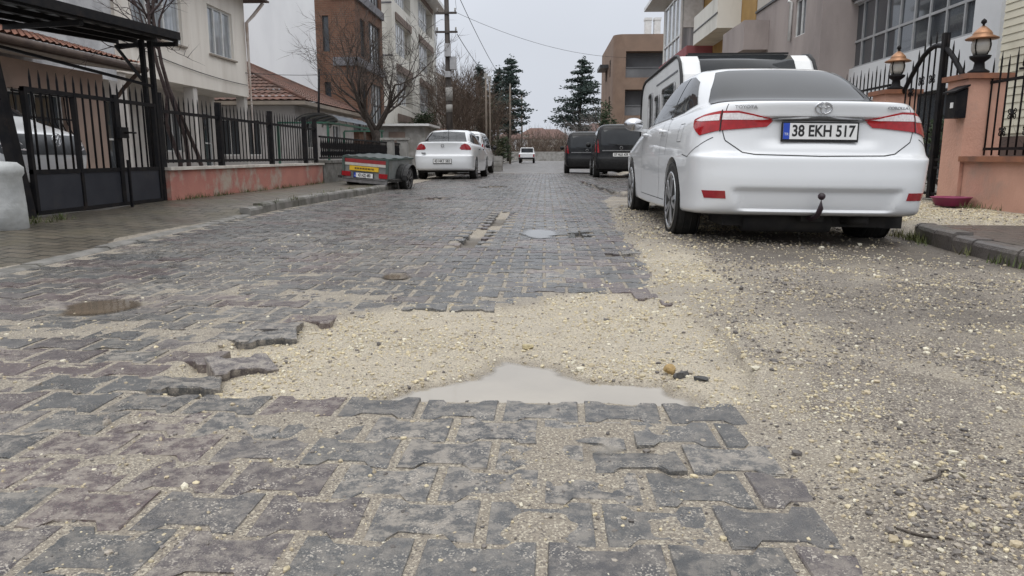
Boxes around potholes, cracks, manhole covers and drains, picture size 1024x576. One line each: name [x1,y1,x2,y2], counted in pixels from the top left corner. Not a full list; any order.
pothole [167,292,762,407]
pothole [454,212,510,249]
